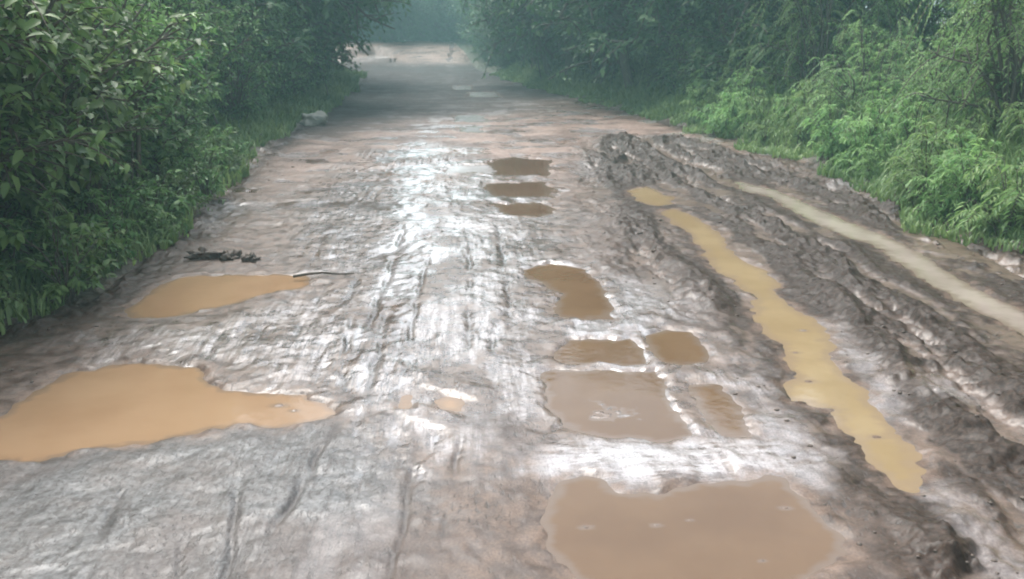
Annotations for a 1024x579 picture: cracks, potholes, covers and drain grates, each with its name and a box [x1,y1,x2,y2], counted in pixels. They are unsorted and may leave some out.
pothole [632,324,723,367]
pothole [524,466,868,579]
pothole [488,200,562,218]
pothole [539,331,660,367]
pothole [481,156,559,177]
pothole [526,363,709,446]
pothole [479,180,561,200]
pothole [515,259,628,325]
pothole [678,377,771,442]
pothole [114,270,320,320]
pothole [0,357,350,464]
